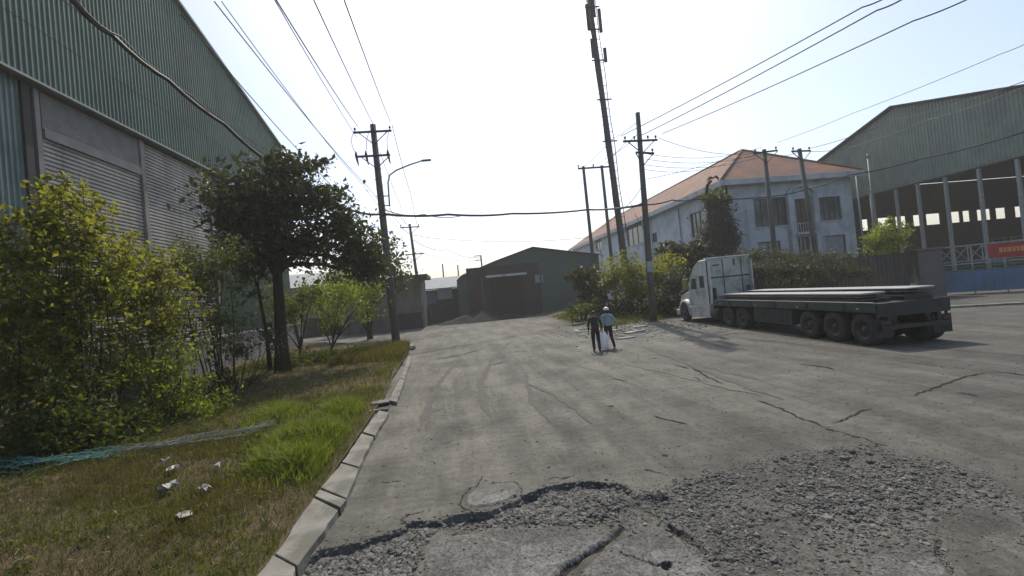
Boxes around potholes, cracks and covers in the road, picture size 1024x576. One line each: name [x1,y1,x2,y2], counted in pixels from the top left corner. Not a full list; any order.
crack [911,371,1022,396]
crack [755,399,886,446]
crack [559,529,661,576]
pothole [618,494,673,534]
pothole [634,444,1024,576]
